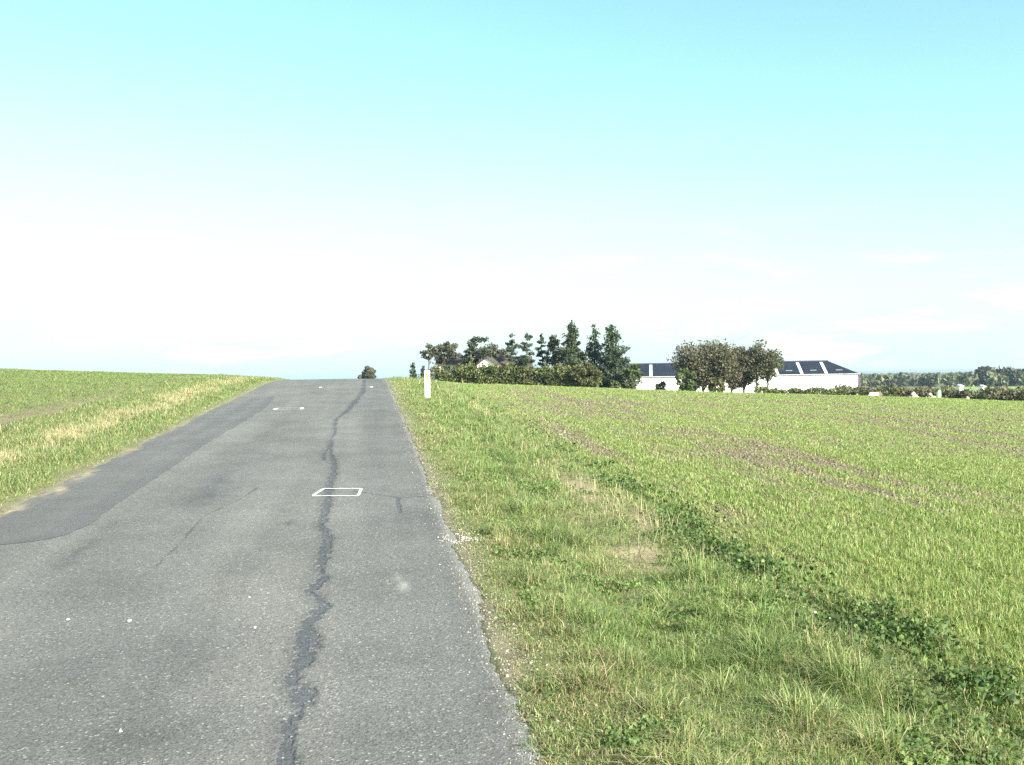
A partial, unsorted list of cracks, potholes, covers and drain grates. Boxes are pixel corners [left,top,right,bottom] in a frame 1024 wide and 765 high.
crack [354,491,417,513]
crack [273,380,365,765]
